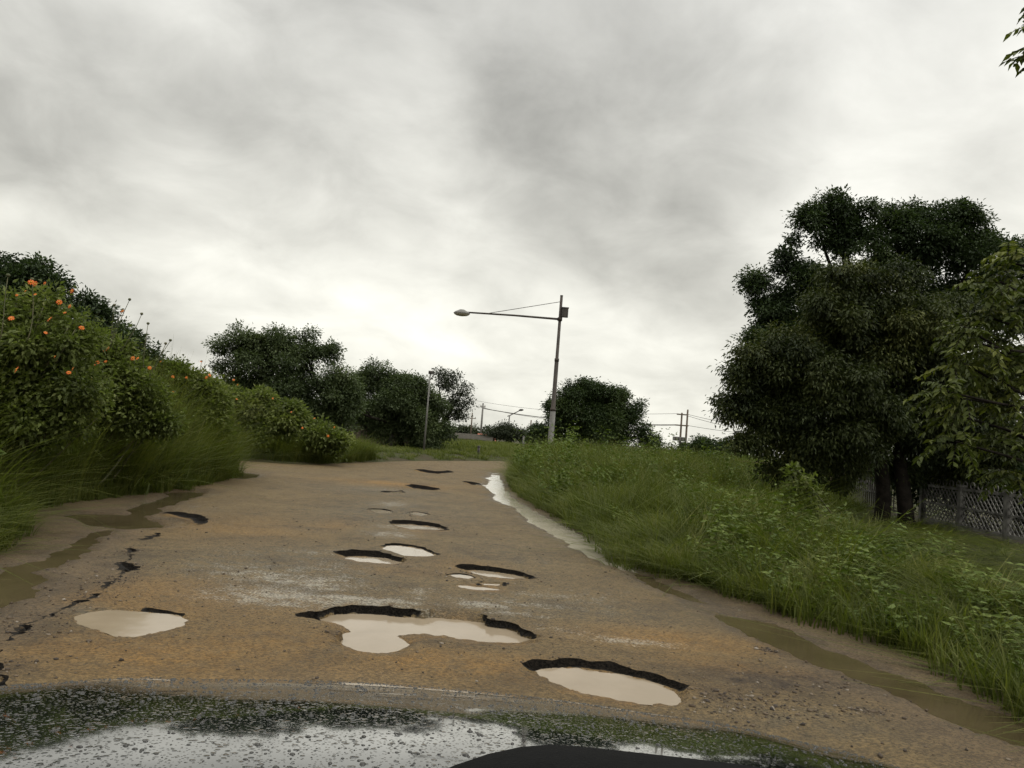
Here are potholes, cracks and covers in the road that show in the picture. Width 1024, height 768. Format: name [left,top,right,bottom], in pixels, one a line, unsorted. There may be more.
pothole [388,520,451,533]
pothole [331,549,422,567]
pothole [159,512,209,526]
pothole [454,581,512,594]
pothole [62,606,200,644]
pothole [291,605,545,659]
pothole [378,543,441,559]
pothole [455,564,538,582]
pothole [521,658,696,711]
crack [6,533,161,641]
